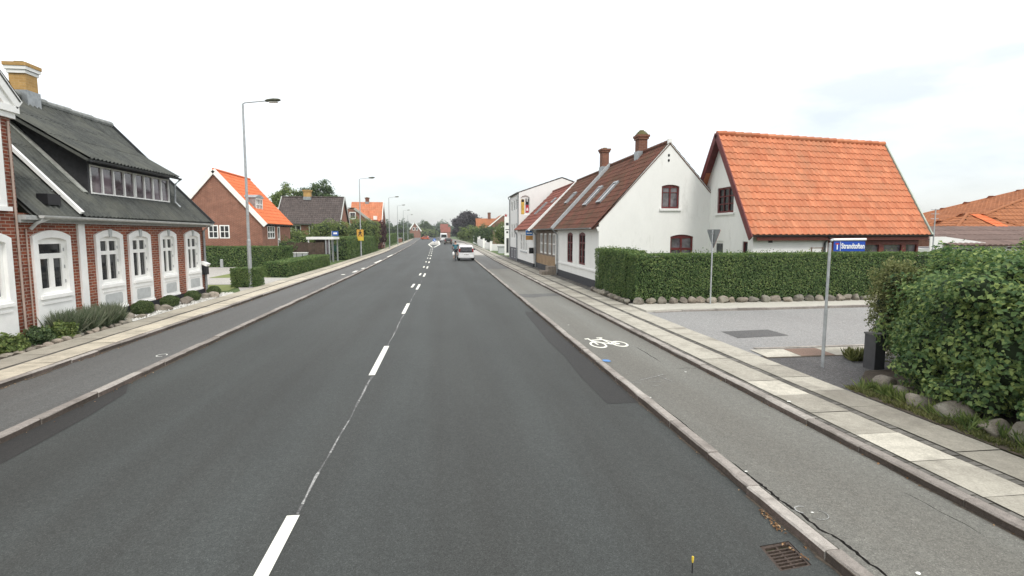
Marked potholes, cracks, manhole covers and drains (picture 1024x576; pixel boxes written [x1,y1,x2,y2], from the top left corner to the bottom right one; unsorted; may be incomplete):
drain grate [760,541,811,571]
crack [731,461,887,576]
